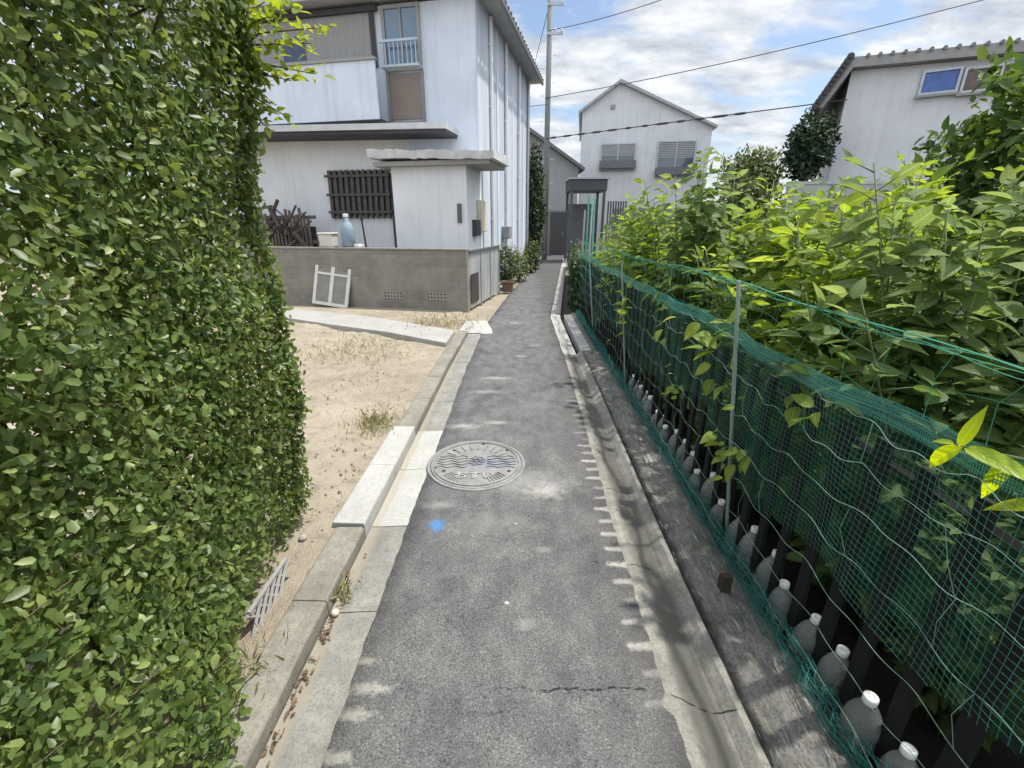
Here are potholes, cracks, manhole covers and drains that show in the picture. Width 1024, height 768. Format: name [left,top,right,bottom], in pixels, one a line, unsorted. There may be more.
manhole cover [427,440,525,491]
crack [672,694,734,714]
